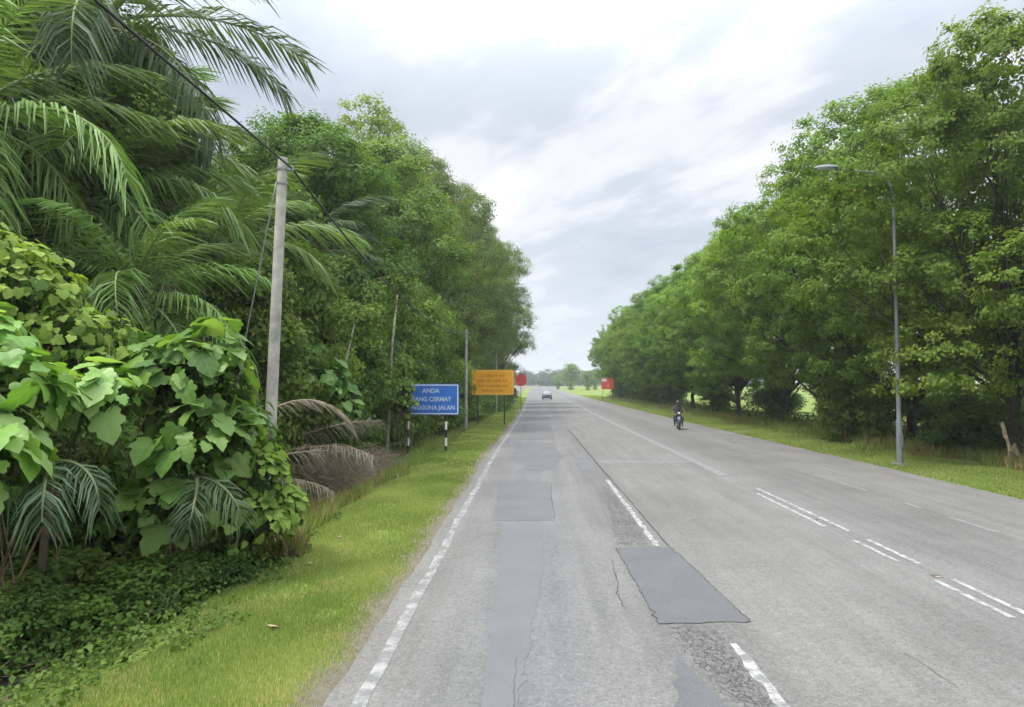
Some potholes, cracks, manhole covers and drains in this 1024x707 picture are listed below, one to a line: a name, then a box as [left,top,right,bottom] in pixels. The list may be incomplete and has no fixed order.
crack [670,626,772,707]
